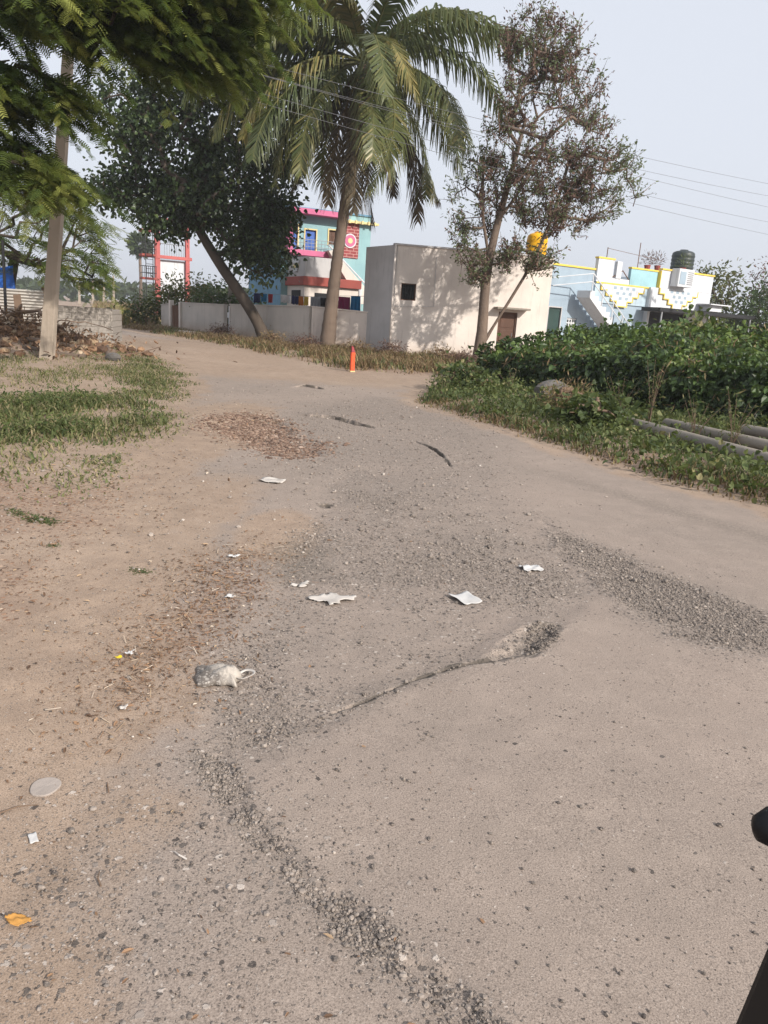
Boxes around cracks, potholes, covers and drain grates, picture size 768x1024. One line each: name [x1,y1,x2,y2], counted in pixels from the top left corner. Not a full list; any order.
crack [411,440,460,469]
pothole [468,618,577,667]
crack [184,660,506,1024]
crack [287,412,381,430]
